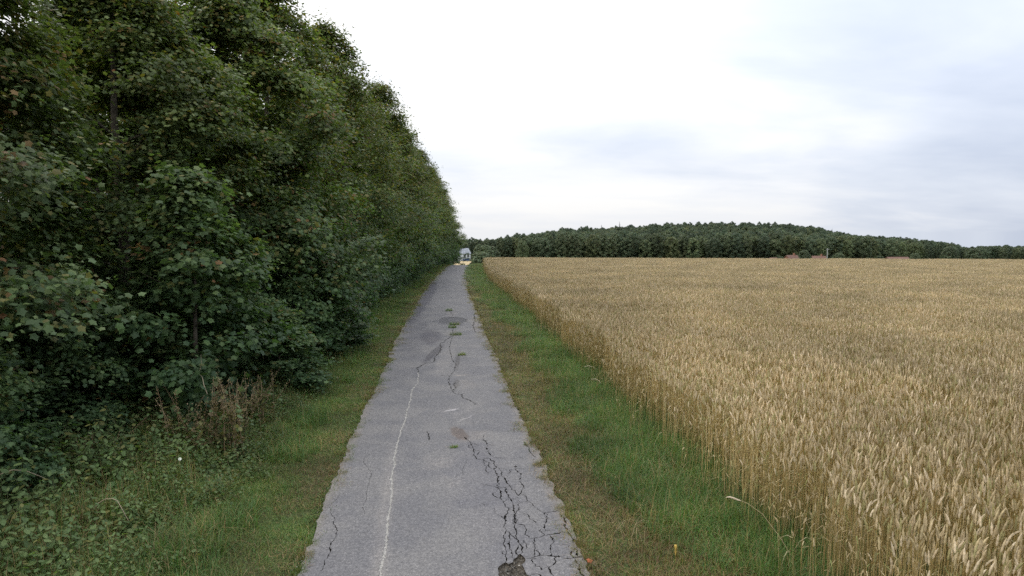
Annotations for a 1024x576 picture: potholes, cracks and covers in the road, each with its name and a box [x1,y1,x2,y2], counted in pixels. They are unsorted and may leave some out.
pothole [498,554,529,576]
crack [462,436,584,576]
crack [362,328,476,576]
